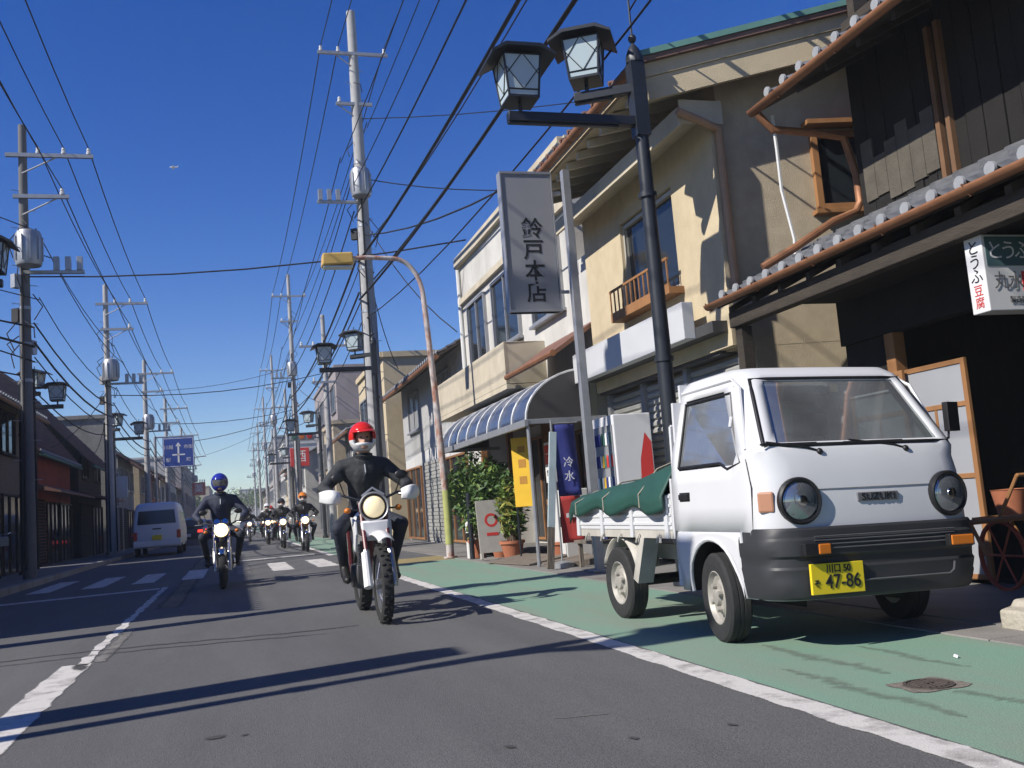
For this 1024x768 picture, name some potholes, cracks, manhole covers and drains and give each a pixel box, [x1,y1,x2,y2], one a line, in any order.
manhole cover [885,677,972,693]
